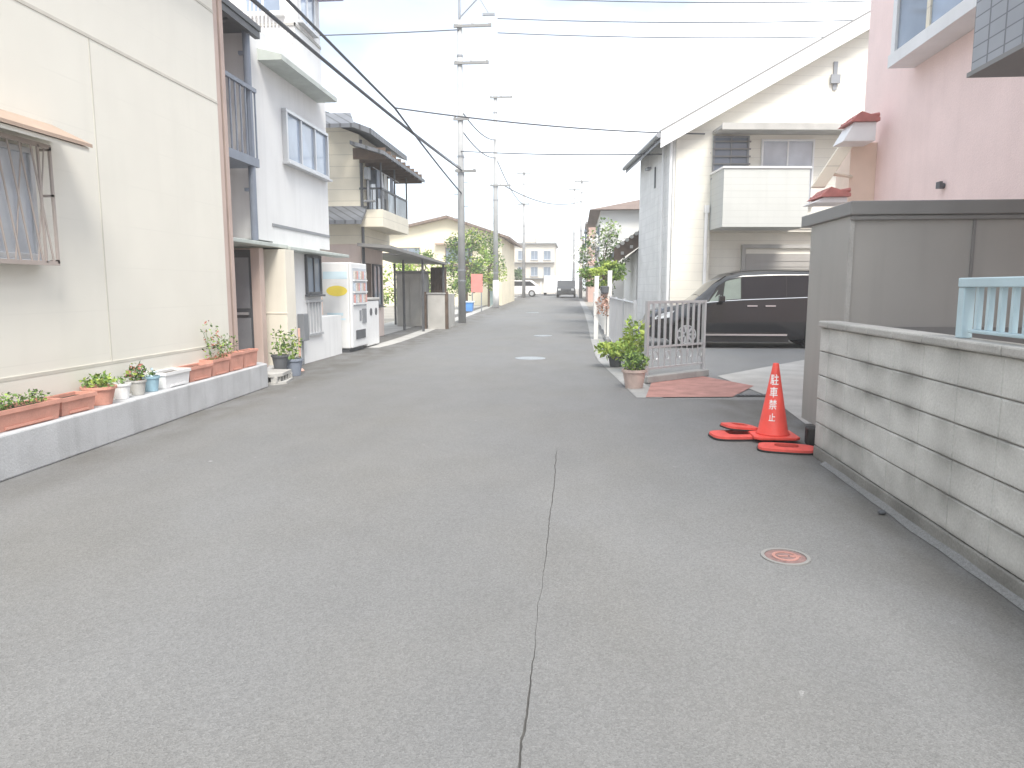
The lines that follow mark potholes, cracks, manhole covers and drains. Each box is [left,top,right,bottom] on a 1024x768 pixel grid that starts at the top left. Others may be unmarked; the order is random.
manhole cover [761,548,811,566]
crack [518,452,557,768]
